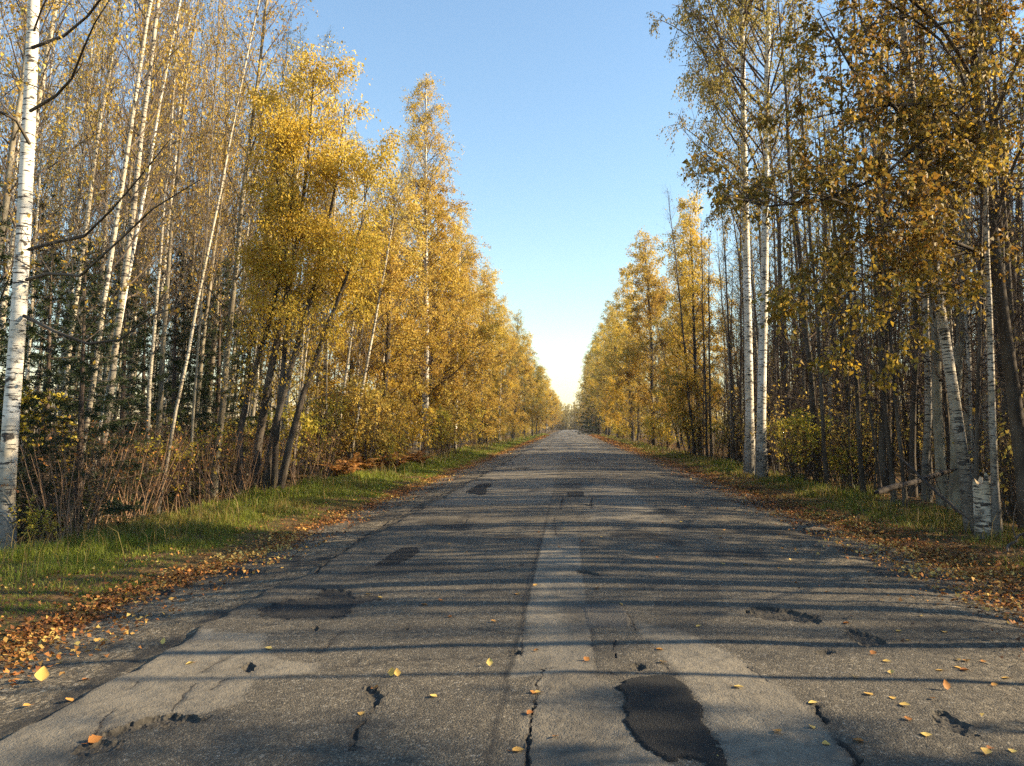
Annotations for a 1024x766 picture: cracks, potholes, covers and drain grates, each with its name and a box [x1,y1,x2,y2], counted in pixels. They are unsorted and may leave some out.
crack [171,653,236,712]
pothole [744,606,822,624]
pothole [72,739,126,757]
pothole [364,685,385,709]
pothole [930,710,981,740]
pothole [844,628,886,647]
crack [813,705,864,766]
pothole [241,662,257,673]
crack [318,518,557,766]
pothole [96,713,221,739]
